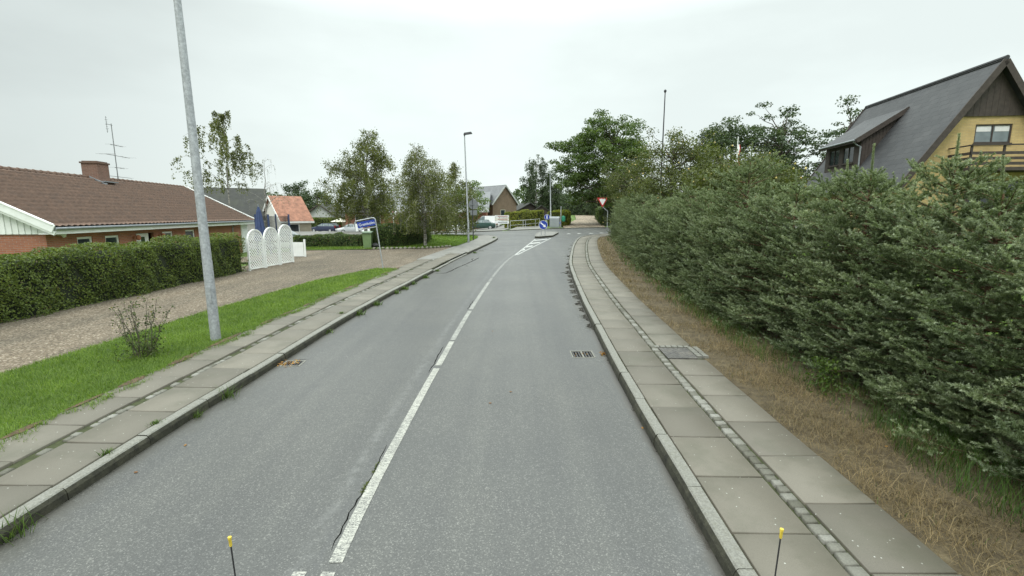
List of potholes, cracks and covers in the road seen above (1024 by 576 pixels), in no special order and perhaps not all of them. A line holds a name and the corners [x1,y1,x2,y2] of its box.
crack [331,445,387,550]
manhole cover [654,345,709,360]
drain grate [277,359,306,367]
